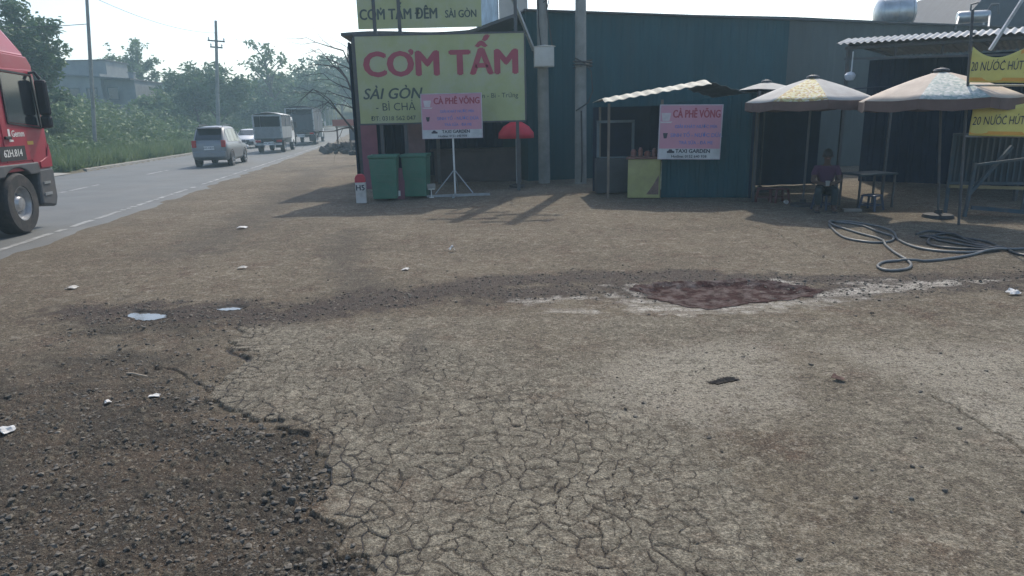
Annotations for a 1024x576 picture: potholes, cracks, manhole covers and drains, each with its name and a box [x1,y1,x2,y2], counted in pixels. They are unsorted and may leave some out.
crack [204,323,778,576]
pothole [120,309,172,321]
